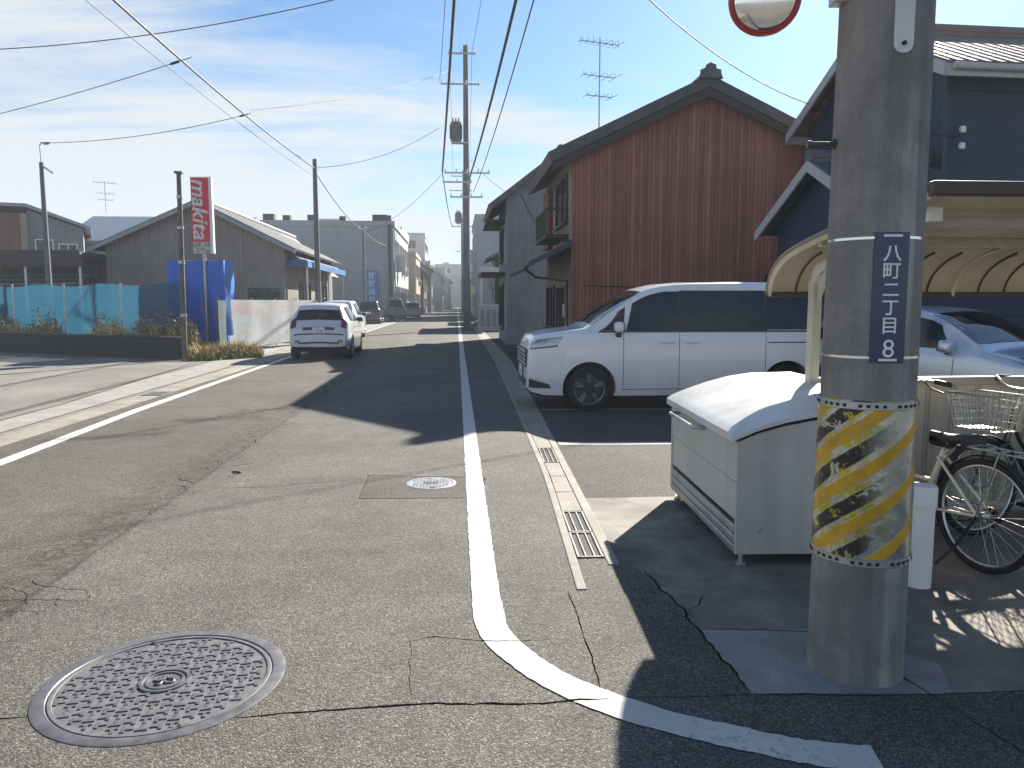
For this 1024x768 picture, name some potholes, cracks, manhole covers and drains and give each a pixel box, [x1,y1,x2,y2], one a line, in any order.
manhole cover [28,631,286,748]
manhole cover [406,477,456,489]
crack [2,578,90,620]
crack [0,593,600,719]
drain grate [568,532,604,559]
drain grate [538,448,559,463]
drain grate [562,511,592,533]
crack [644,569,749,690]
